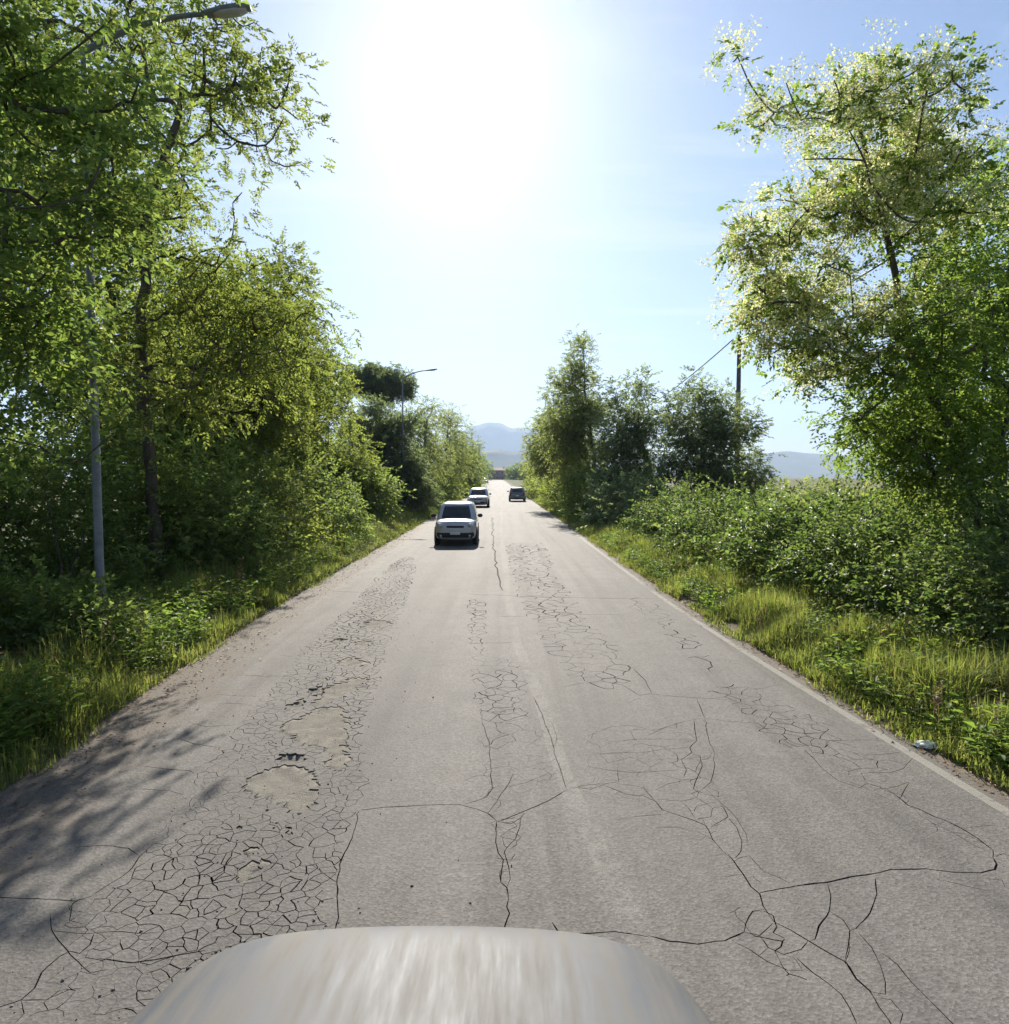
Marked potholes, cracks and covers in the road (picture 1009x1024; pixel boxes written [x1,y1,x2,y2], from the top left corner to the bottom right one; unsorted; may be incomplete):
pothole [241,764,321,815]
crack [0,558,416,1024]
pothole [279,706,353,772]
crack [552,662,1008,1024]
crack [364,543,713,927]
